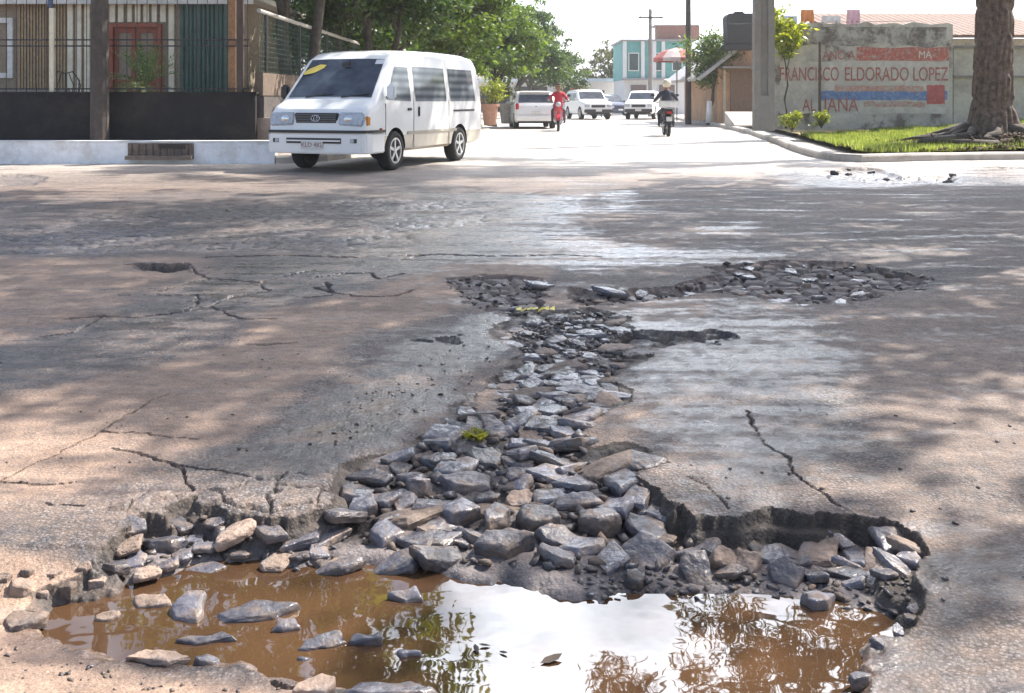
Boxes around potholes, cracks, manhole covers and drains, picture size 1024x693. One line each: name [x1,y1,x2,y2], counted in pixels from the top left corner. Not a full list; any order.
crack [38,266,413,338]
pothole [566,260,930,306]
crack [743,409,842,507]
pothole [804,167,960,185]
crack [0,394,250,507]
pothole [25,307,932,693]
pothole [444,274,555,319]
pothole [121,262,193,273]
